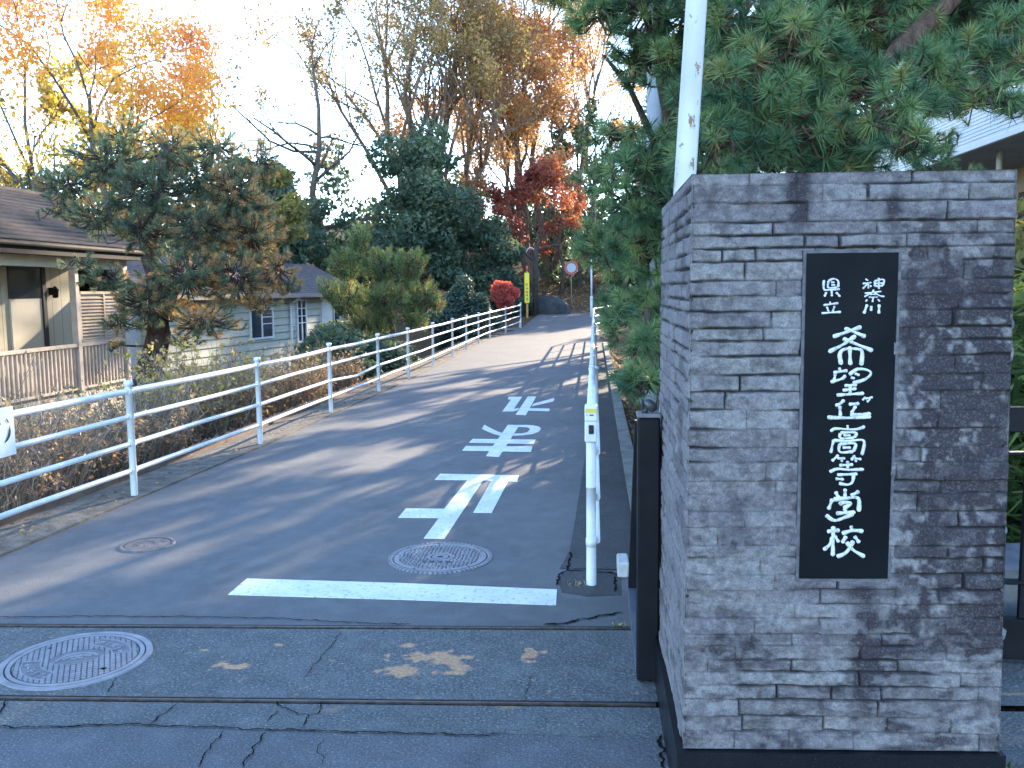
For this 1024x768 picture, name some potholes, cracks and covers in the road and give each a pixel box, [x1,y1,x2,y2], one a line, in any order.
crack [543,612,619,625]
crack [657,735,666,768]
manhole cover [0,631,153,691]
manhole cover [119,536,176,553]
crack [556,552,627,592]
crack [0,615,410,677]
crack [0,700,504,767]
manhole cover [387,542,493,574]
